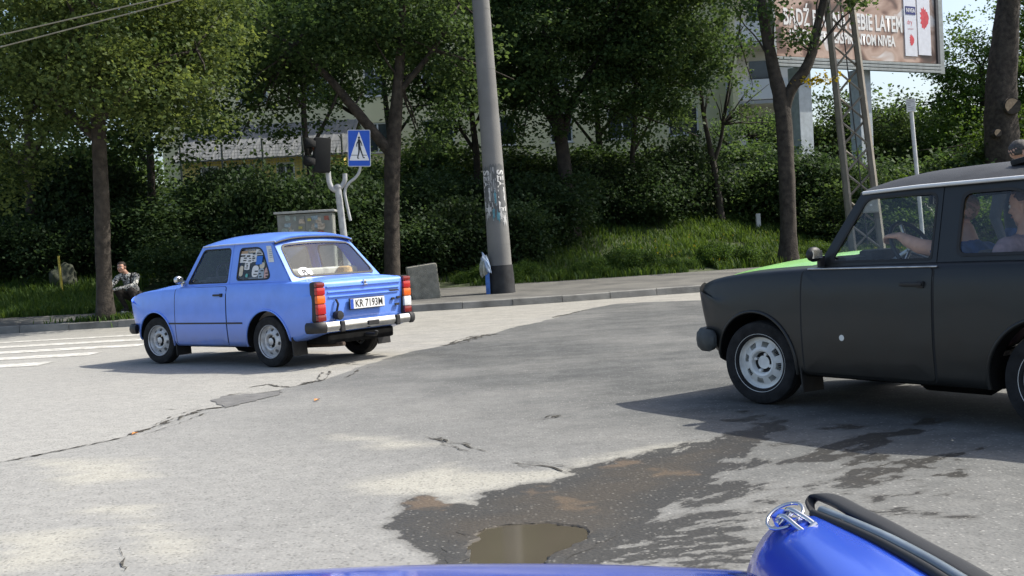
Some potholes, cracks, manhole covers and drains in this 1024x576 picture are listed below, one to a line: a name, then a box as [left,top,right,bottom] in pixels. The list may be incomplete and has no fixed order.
crack [428,436,485,451]
crack [229,363,360,395]
crack [514,460,570,473]
pothole [441,513,619,564]
crack [440,334,493,346]
